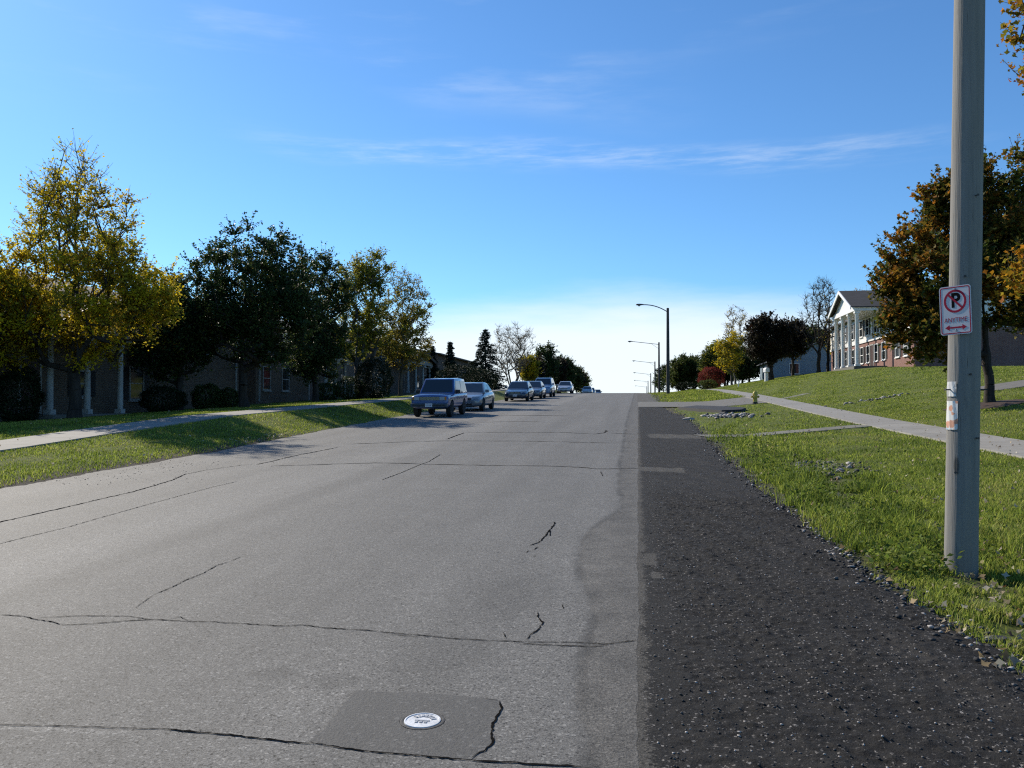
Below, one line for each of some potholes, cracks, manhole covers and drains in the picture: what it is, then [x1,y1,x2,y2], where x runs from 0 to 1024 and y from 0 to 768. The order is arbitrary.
crack [0,557,634,647]
manhole cover [400,712,445,730]
crack [260,415,636,480]
crack [0,698,589,768]
crack [0,466,231,522]
